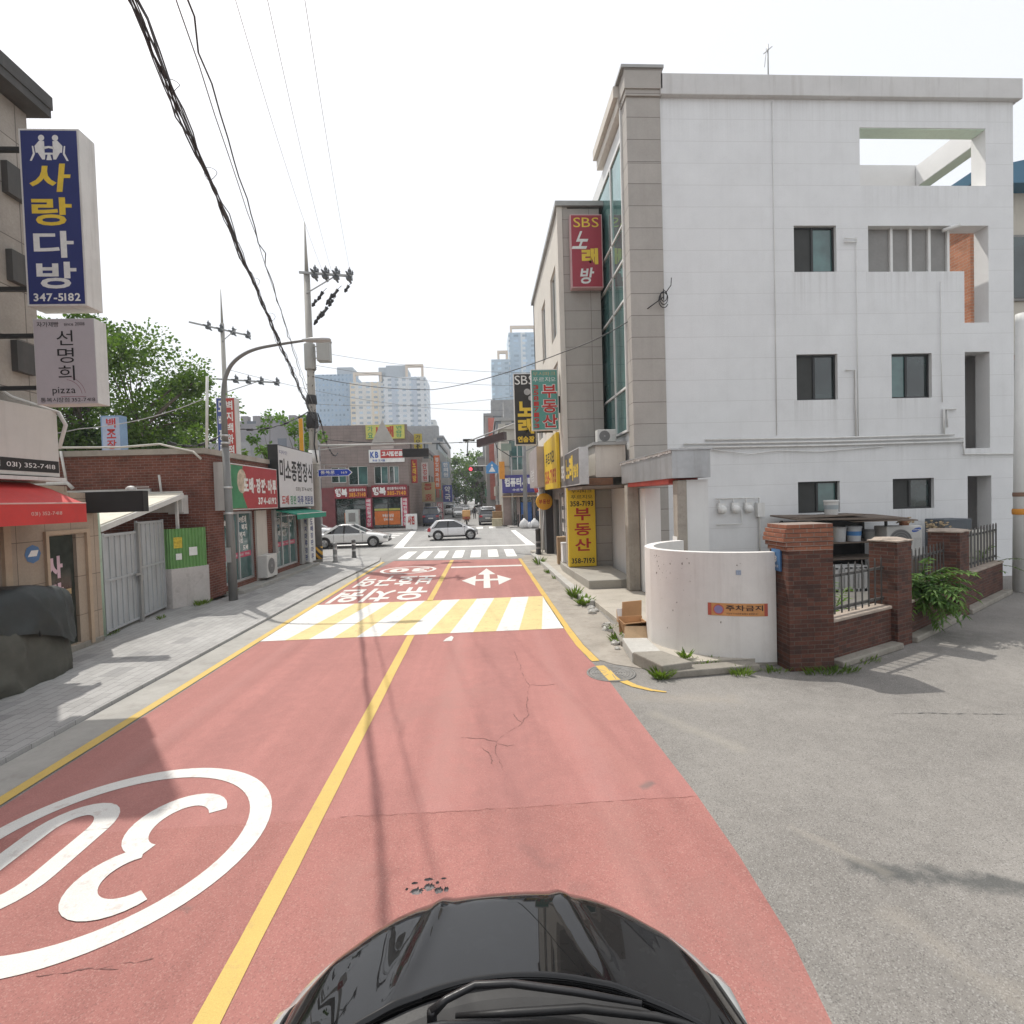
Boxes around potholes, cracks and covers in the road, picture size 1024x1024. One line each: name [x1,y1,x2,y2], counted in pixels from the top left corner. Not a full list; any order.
manhole cover [587,665,636,682]
crack [462,651,554,766]
crack [38,958,154,977]
pothole [405,877,449,895]
